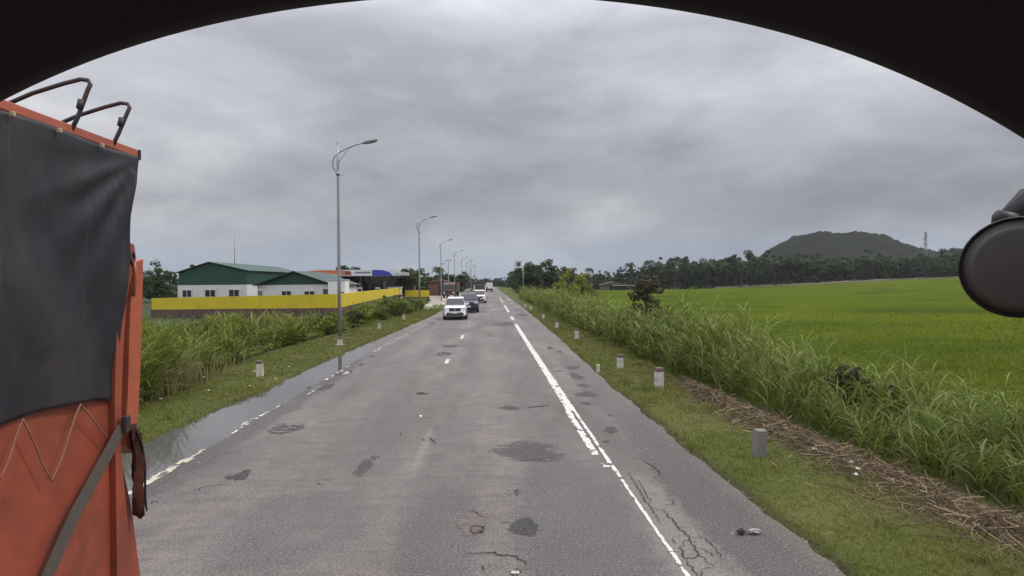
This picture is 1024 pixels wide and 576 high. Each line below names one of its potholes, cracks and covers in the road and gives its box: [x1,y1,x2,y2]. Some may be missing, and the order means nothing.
crack [630,461,721,576]
crack [468,551,526,571]
